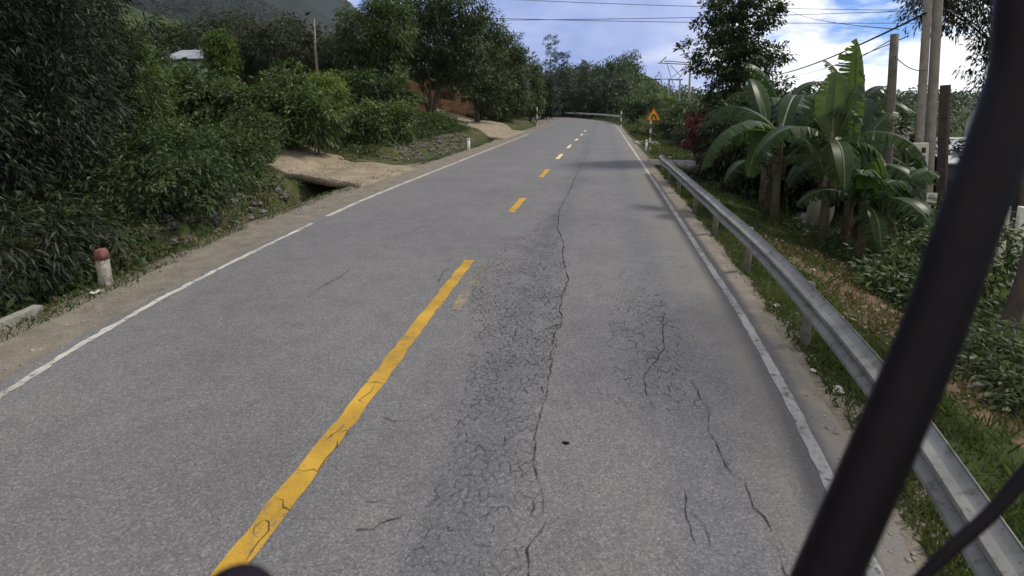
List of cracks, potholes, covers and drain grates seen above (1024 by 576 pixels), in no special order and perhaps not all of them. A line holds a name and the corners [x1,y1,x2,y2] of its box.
crack [684,487,711,547]
crack [246,497,292,560]
crack [694,385,788,576]
crack [404,173,577,576]
crack [297,426,348,471]
